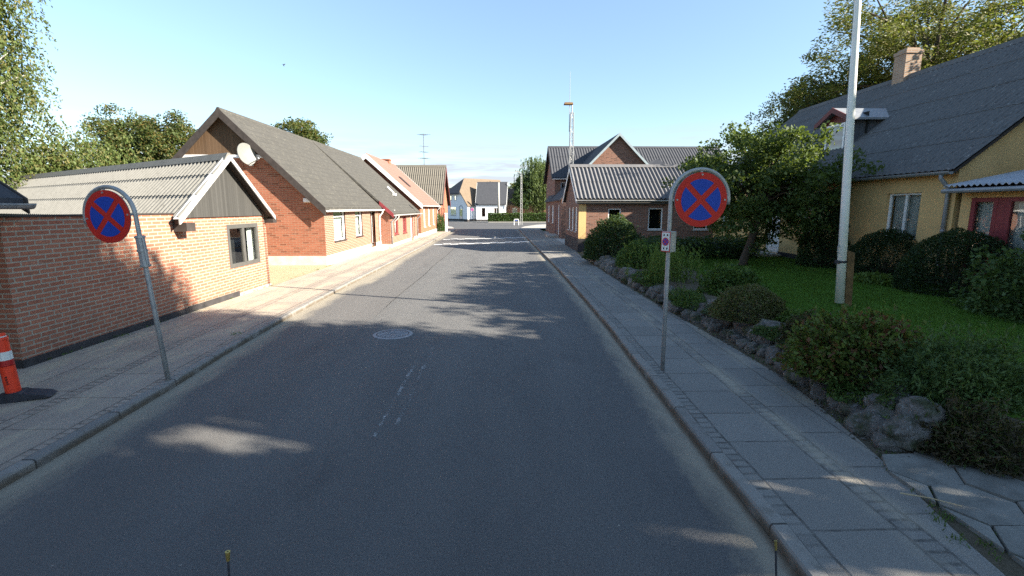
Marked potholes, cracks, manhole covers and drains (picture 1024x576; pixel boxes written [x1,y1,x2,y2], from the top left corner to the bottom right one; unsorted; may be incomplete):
manhole cover [373,329,413,340]
